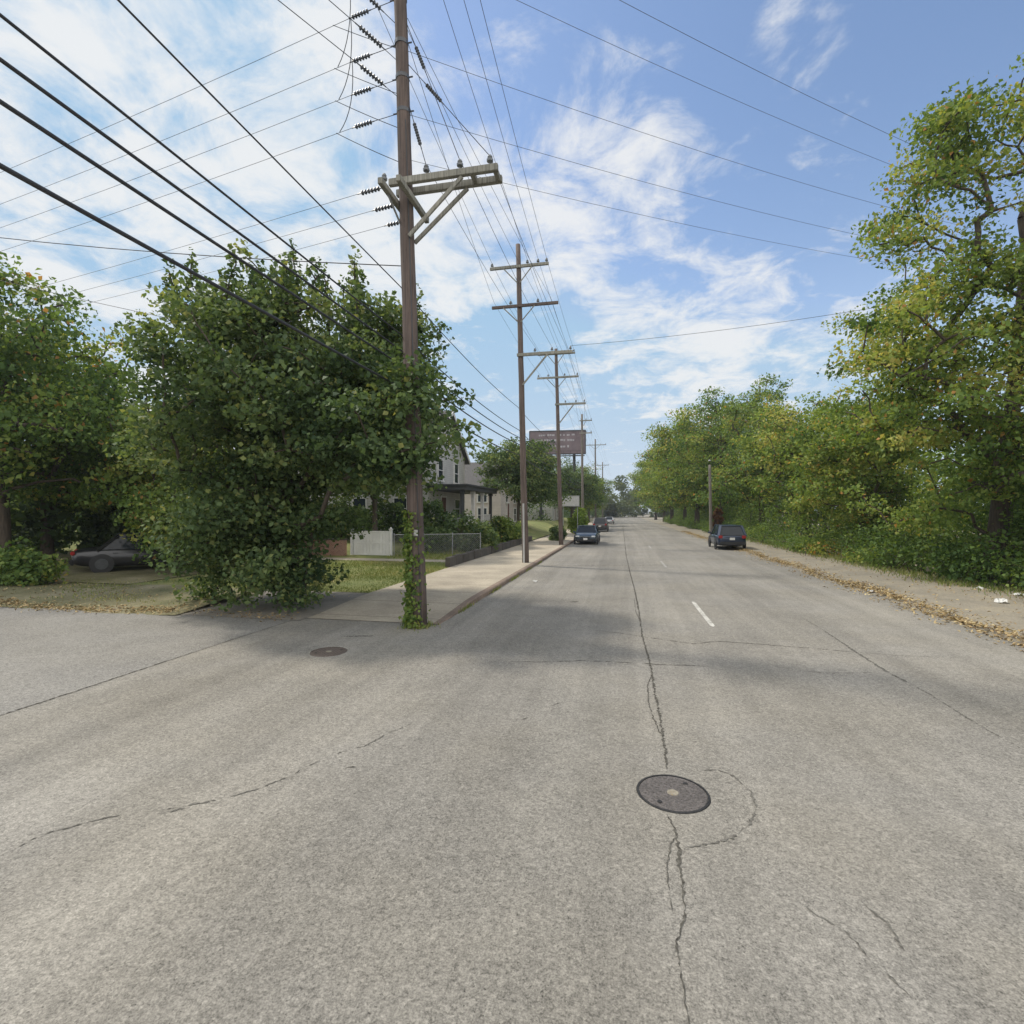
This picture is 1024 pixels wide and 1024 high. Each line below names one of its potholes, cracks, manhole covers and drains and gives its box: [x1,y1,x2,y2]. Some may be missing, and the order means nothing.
manhole cover [636,774,711,814]
manhole cover [310,647,347,657]
crack [804,905,907,993]
crack [512,531,1020,769]
crack [666,769,757,1024]
crack [2,724,409,855]
